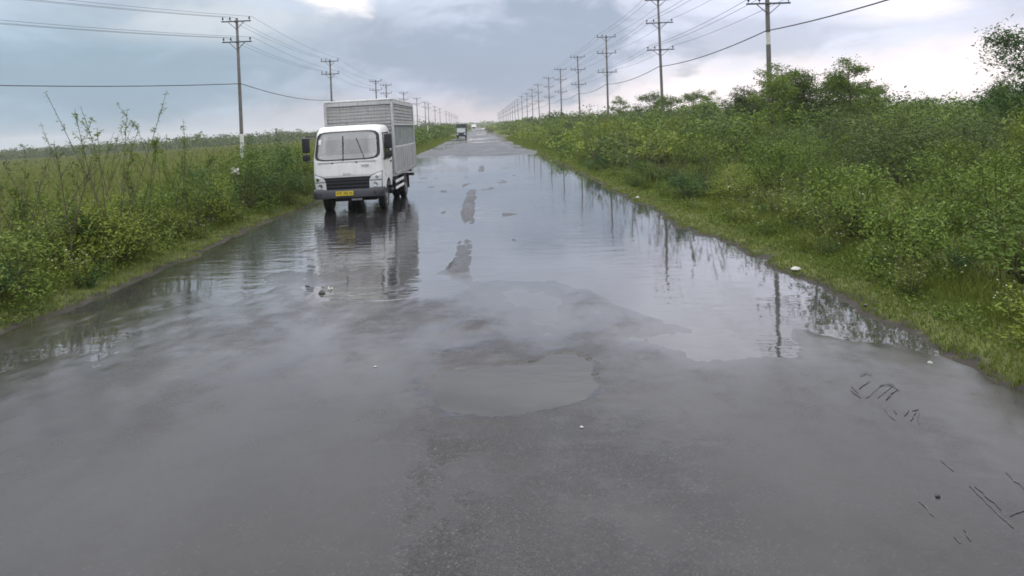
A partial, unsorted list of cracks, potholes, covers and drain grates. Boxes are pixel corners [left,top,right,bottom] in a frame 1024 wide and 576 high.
crack [954,472,1024,543]
crack [851,372,919,423]
